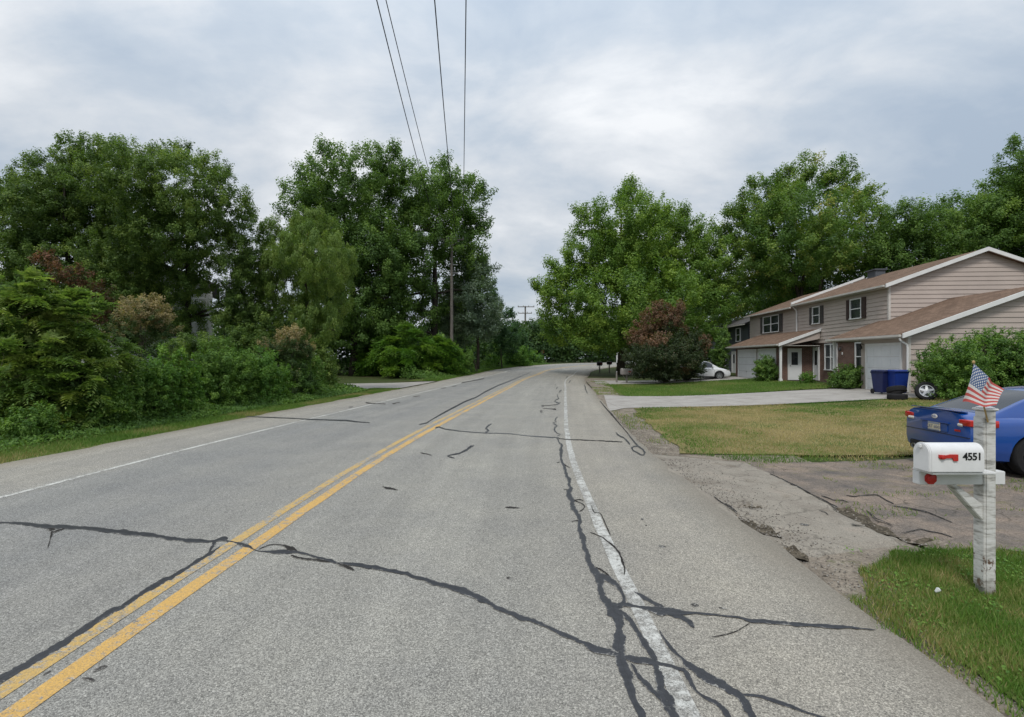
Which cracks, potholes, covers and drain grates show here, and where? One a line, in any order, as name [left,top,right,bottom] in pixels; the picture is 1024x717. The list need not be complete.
crack [258,544,329,562]
crack [558,381,628,442]
crack [564,489,626,576]
